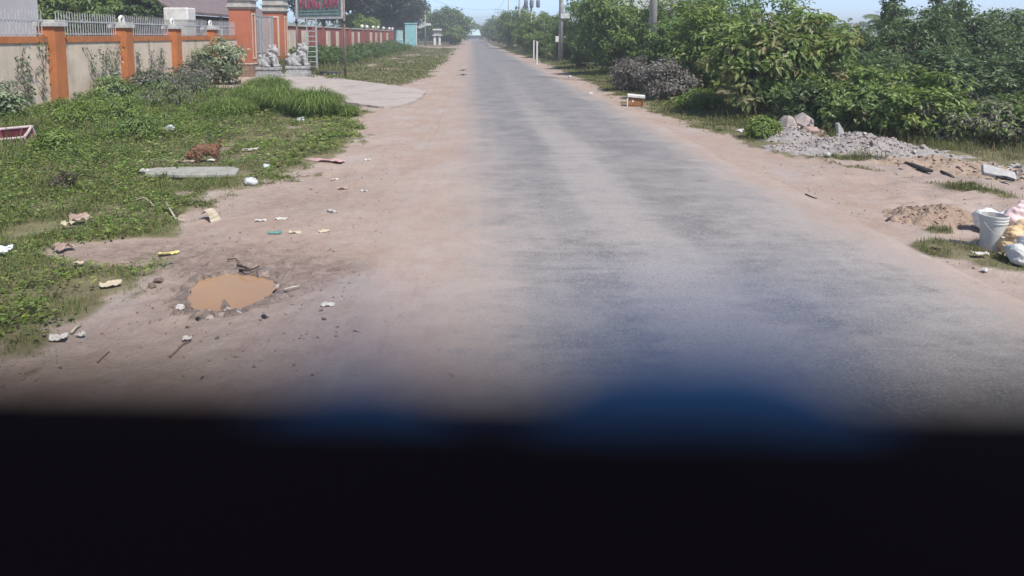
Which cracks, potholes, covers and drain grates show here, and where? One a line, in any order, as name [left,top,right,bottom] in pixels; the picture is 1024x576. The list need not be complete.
pothole [167,261,297,322]
